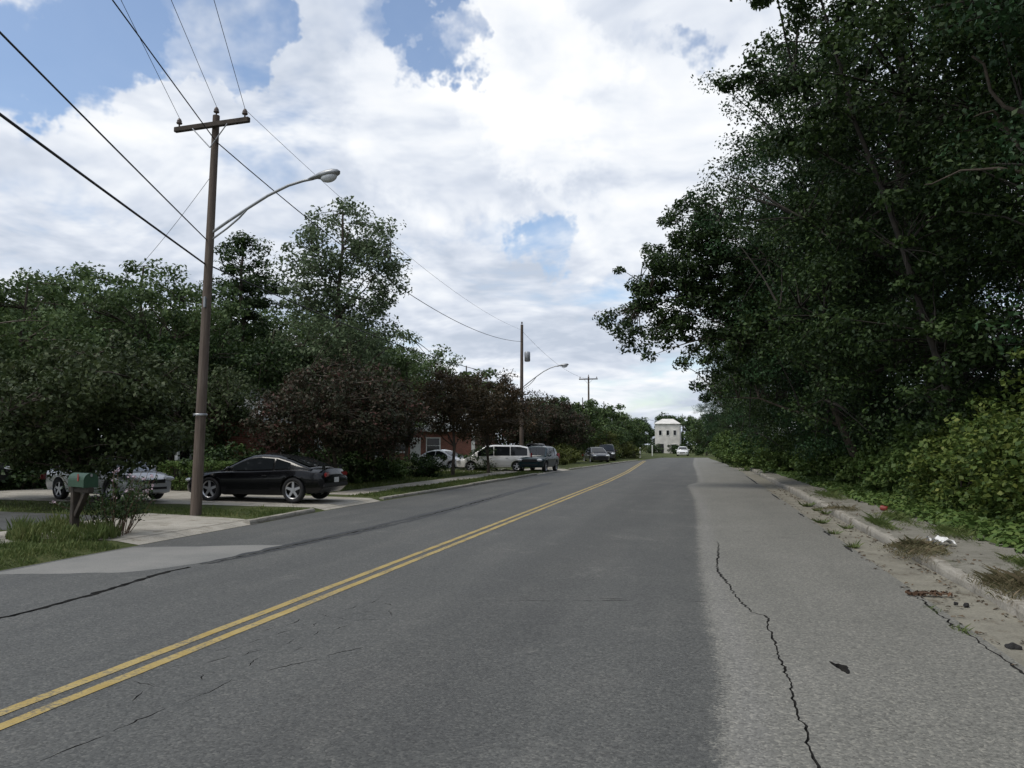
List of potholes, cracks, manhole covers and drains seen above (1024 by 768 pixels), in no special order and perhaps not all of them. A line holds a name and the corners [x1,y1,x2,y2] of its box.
crack [915,596,1024,674]
crack [41,600,392,761]
pothole [829,661,850,674]
crack [517,543,821,768]
